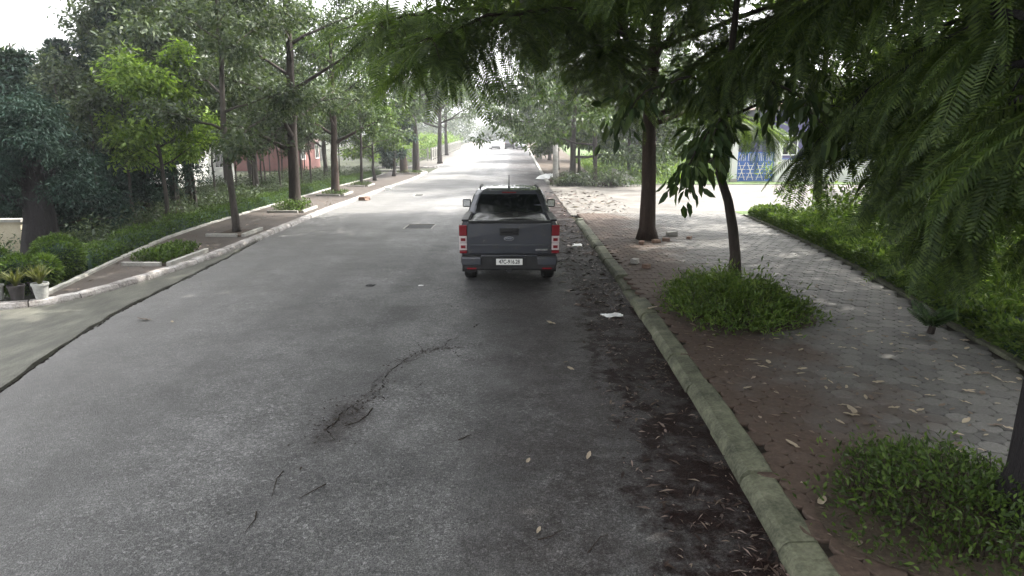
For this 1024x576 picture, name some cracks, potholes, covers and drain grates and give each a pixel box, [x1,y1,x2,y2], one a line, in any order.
crack [314,337,467,442]
